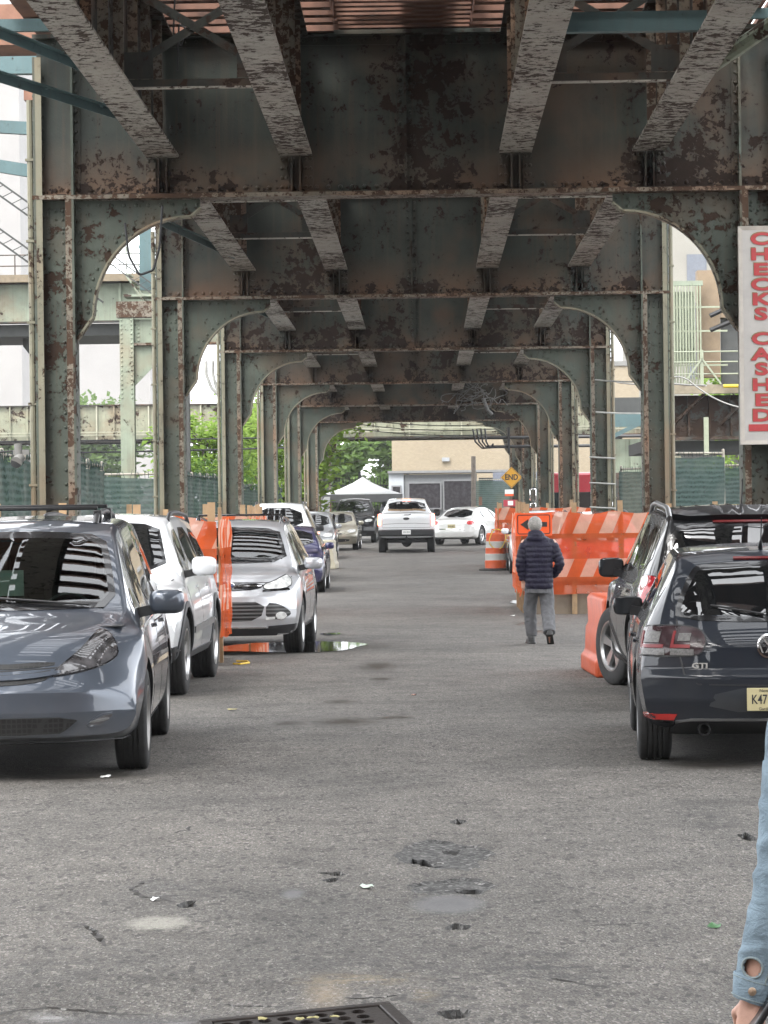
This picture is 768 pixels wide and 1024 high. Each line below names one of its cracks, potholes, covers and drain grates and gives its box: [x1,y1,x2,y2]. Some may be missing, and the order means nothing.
drain grate [197,1001,413,1024]
crack [69,923,107,947]
pothole [394,839,496,871]
pothole [407,878,497,895]
pothole [436,1009,471,1019]
pothole [737,832,757,841]
crack [129,881,177,903]
crack [0,1007,153,1015]
